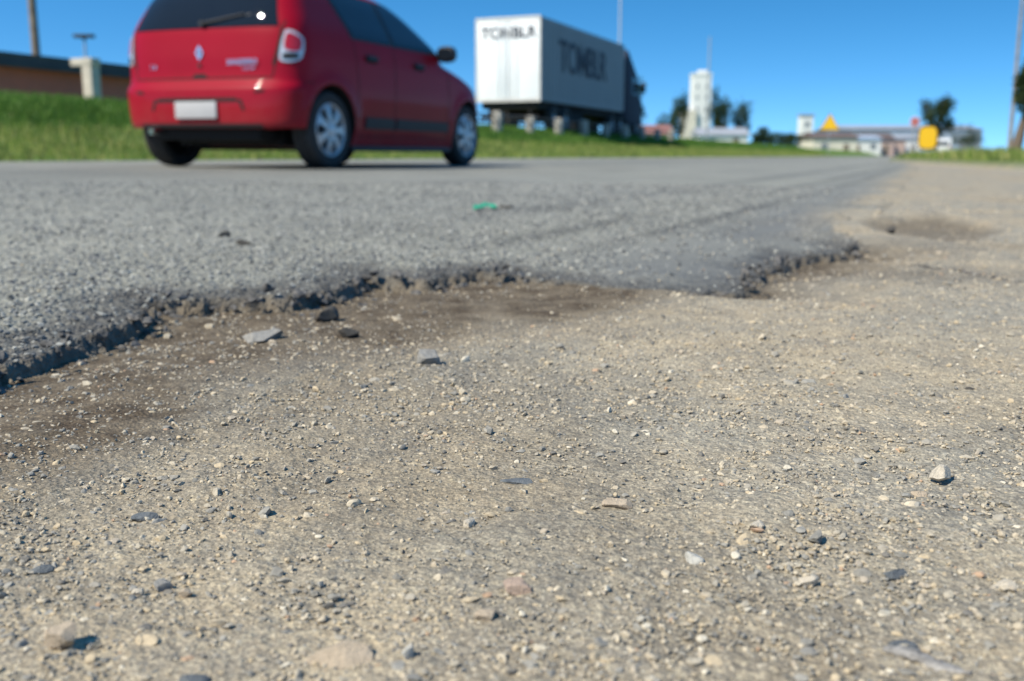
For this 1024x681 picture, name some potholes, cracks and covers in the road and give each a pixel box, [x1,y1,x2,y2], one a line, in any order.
pothole [860,211,1011,242]
pothole [0,262,670,505]
